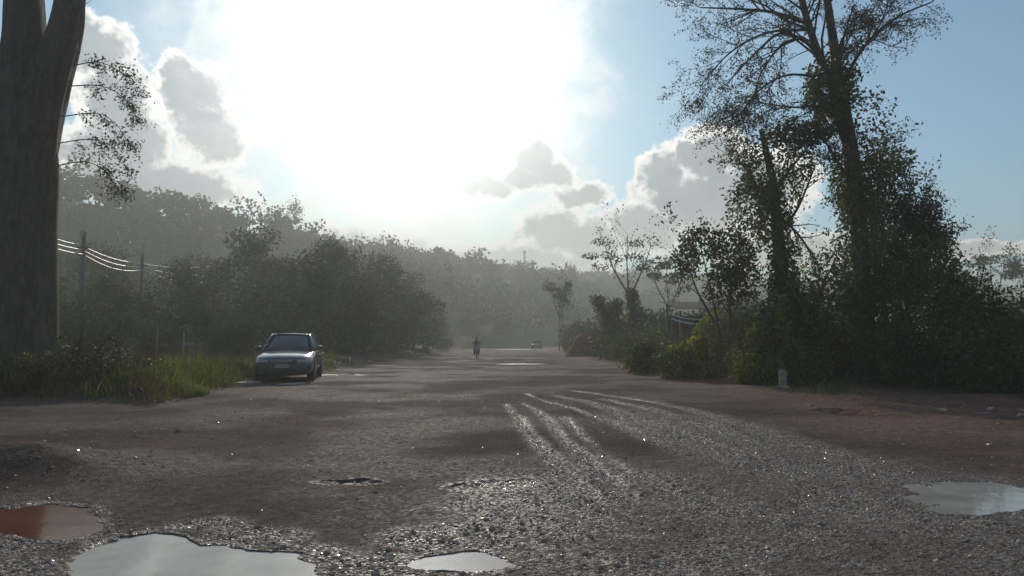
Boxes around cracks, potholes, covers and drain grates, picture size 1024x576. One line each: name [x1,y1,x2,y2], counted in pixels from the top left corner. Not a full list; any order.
pothole [889,477,1024,518]
pothole [0,500,116,544]
pothole [392,547,528,576]
pothole [806,408,874,416]
pothole [308,477,391,486]
pothole [50,529,331,576]
